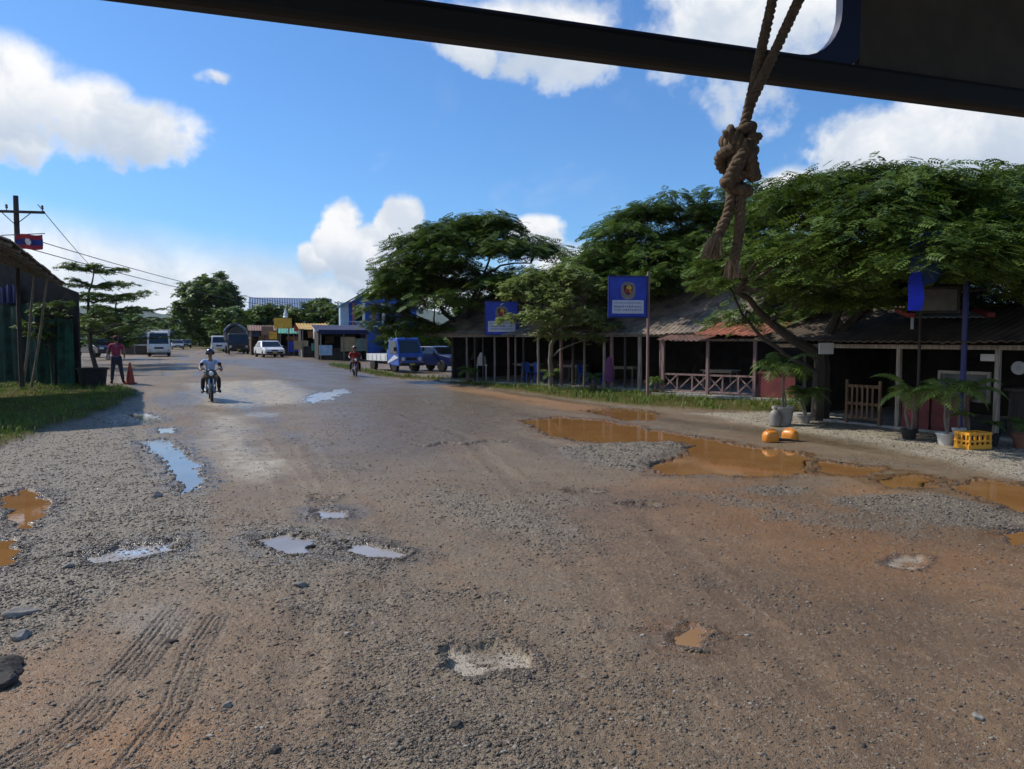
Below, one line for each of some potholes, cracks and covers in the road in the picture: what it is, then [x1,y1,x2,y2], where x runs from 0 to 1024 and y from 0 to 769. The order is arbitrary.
pothole [130,437,222,494]
pothole [864,472,945,490]
pothole [516,416,824,479]
pothole [608,499,680,510]
pothole [0,534,33,570]
pothole [304,506,356,521]
pothole [0,483,63,533]
pothole [297,388,354,404]
pothole [429,632,565,686]
pothole [584,408,661,421]
pothole [327,538,417,563]
pothole [238,530,337,557]
